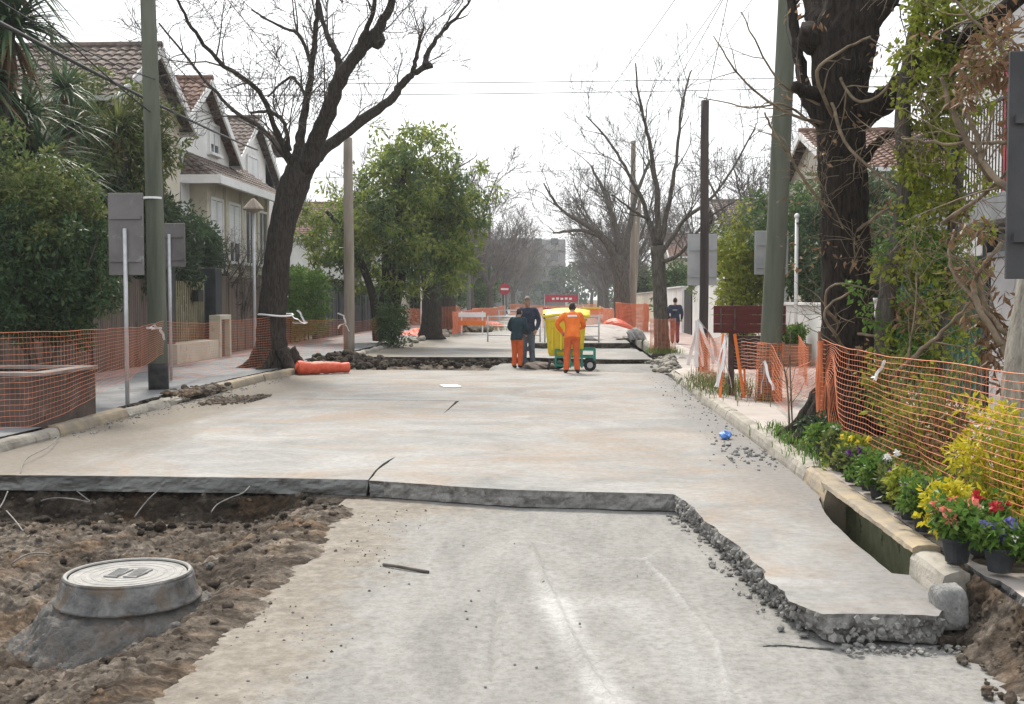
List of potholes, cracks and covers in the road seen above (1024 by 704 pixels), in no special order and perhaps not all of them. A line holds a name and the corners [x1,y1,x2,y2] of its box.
manhole cover [6,558,212,672]
